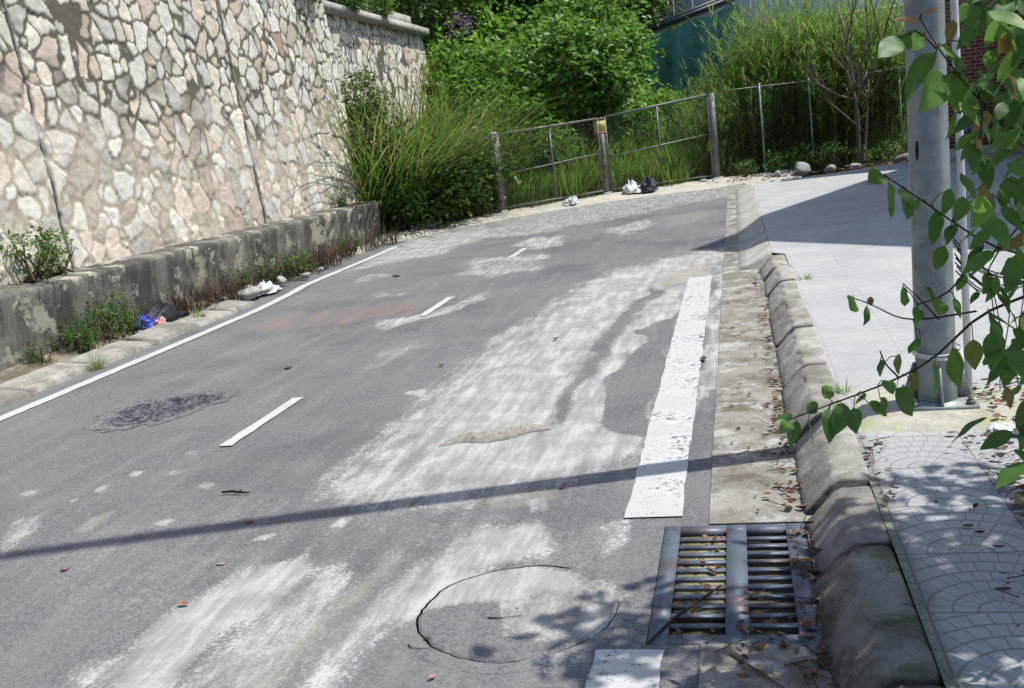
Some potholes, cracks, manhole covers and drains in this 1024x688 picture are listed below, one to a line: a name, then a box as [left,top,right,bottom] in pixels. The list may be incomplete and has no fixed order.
pothole [82,389,242,432]
drain grate [646,523,823,645]
